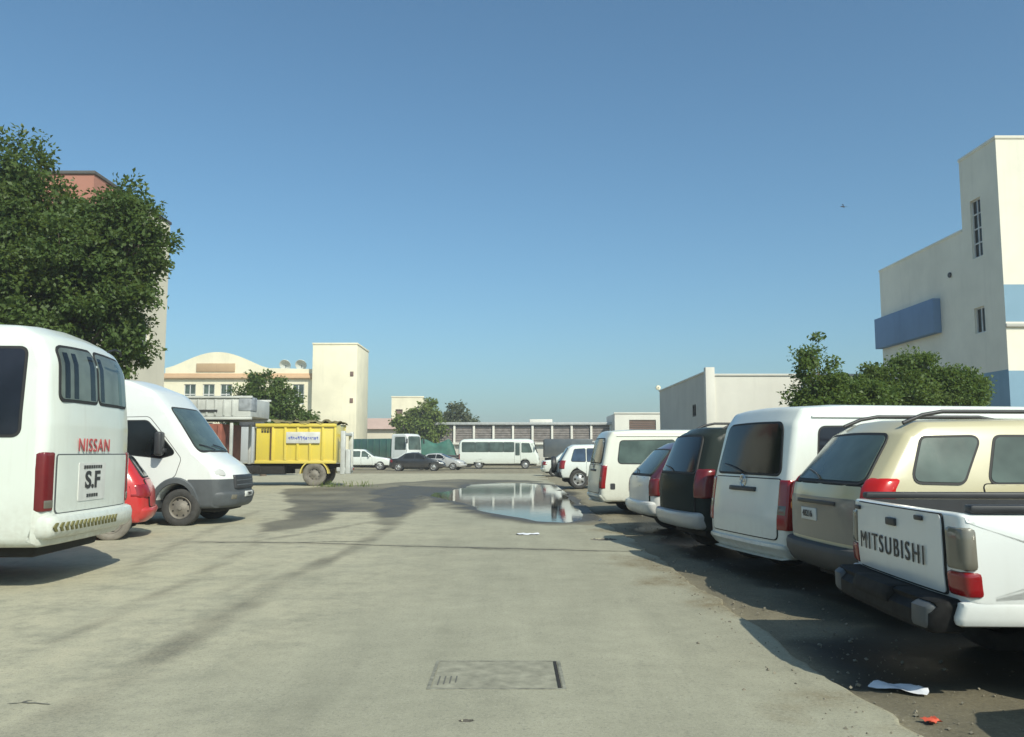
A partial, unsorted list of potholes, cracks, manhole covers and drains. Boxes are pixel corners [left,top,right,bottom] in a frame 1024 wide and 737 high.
manhole cover [426,661,567,690]
